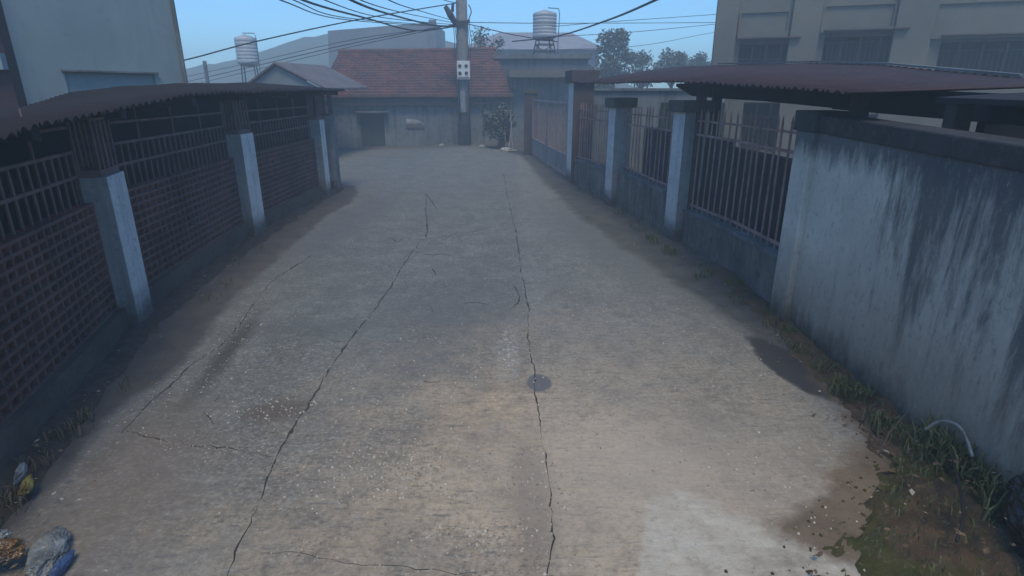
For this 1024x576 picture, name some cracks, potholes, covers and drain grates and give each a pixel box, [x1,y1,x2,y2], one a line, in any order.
crack [121,194,487,576]
crack [273,551,537,575]
